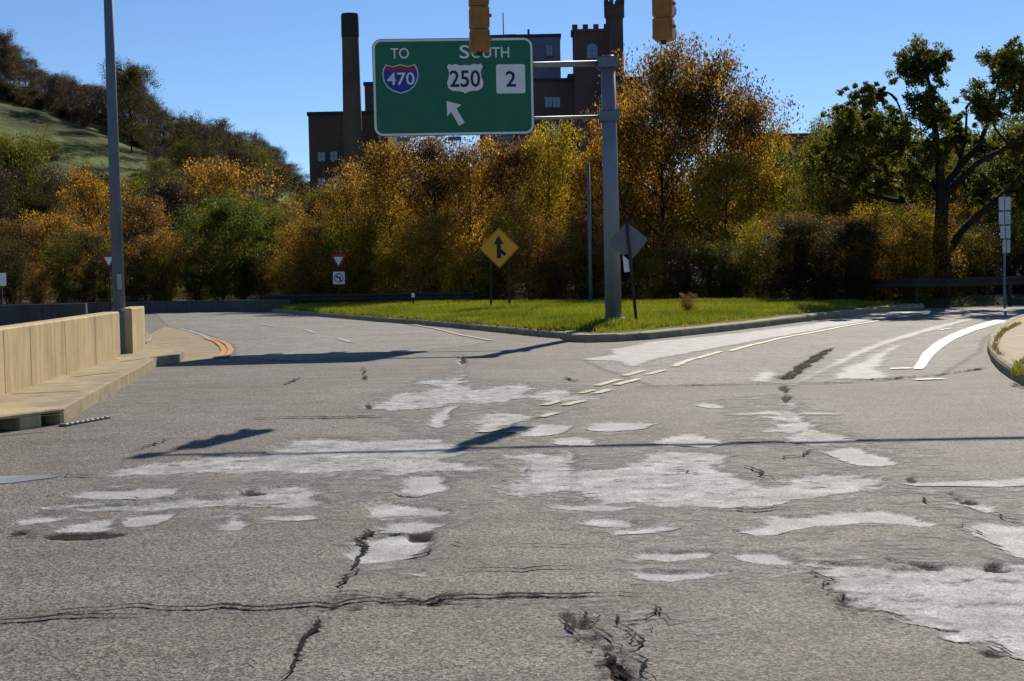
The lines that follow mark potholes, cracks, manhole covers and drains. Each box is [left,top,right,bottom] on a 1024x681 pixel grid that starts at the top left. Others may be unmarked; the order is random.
crack [798,568,848,602]
pothole [44,532,126,541]
pothole [408,532,434,543]
crack [0,514,670,681]
